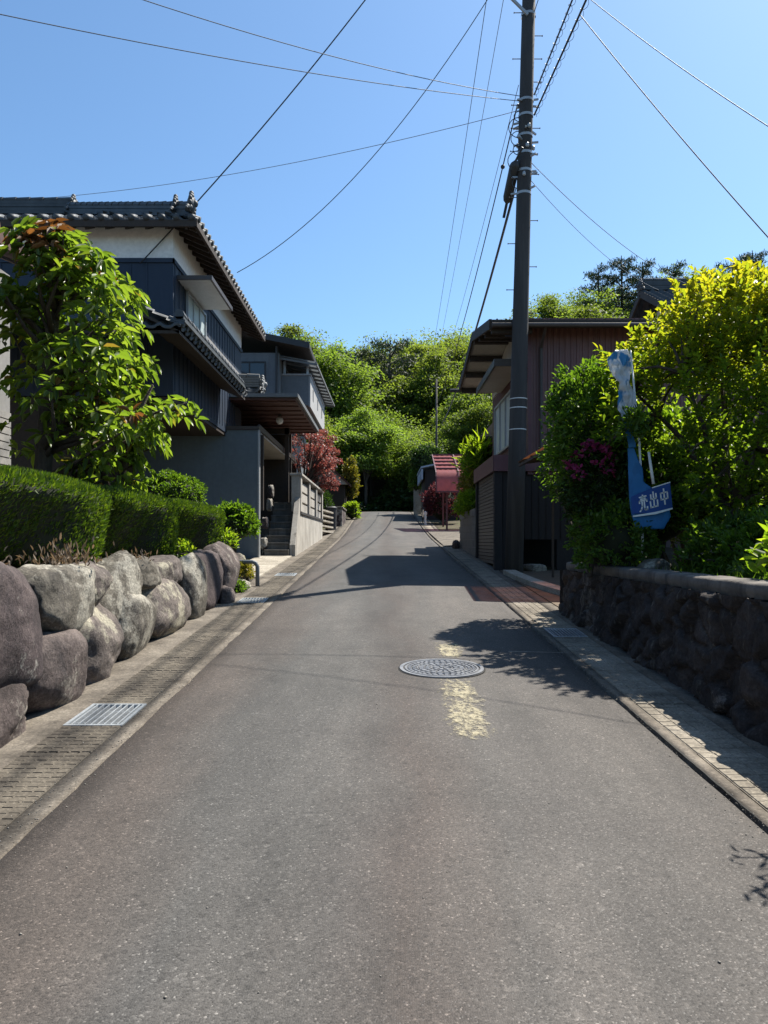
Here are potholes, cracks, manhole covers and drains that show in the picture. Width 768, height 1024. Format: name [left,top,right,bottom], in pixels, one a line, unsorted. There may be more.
drain grate [63,703,147,726]
drain grate [544,628,588,637]
manhole cover [398,659,486,679]
